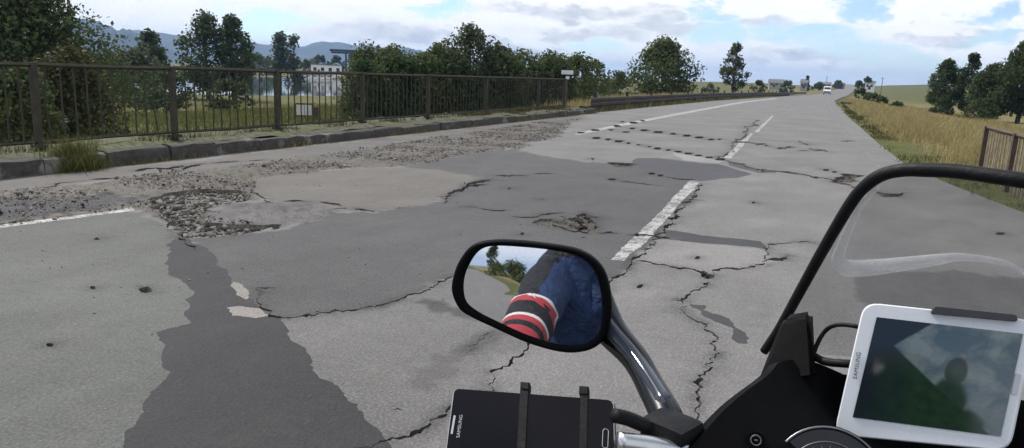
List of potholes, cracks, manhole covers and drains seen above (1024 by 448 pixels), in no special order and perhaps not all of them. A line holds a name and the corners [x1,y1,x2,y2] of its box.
crack [634,233,814,419]
pothole [532,213,599,234]
crack [255,276,453,318]
crack [251,187,375,212]
pothole [147,189,282,239]
crack [445,173,616,238]
crack [359,332,489,448]
crack [725,141,827,179]
